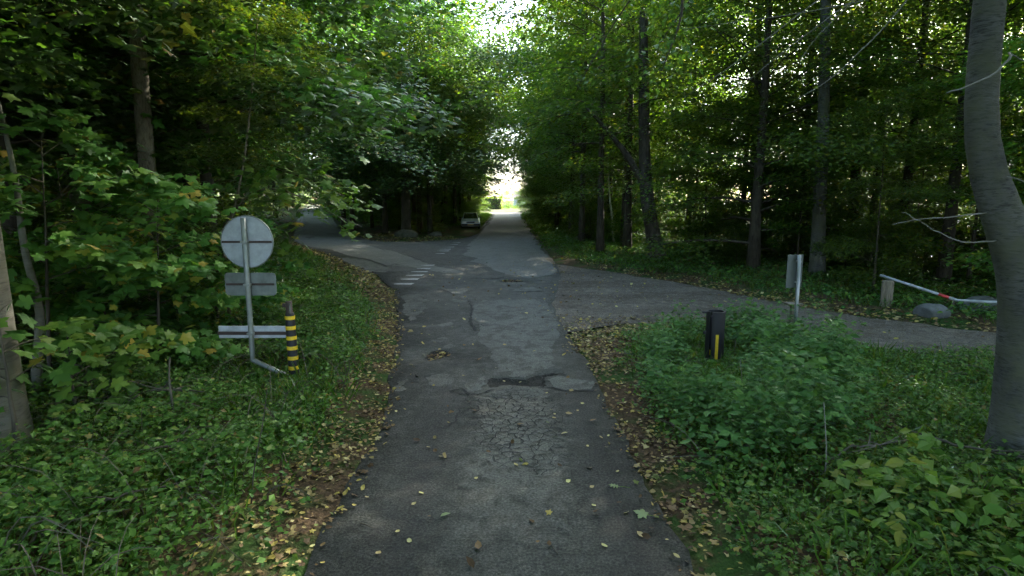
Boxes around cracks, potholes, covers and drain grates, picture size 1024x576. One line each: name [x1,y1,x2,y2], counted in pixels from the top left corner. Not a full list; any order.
crack [434,386,594,475]
pothole [487,372,565,388]
